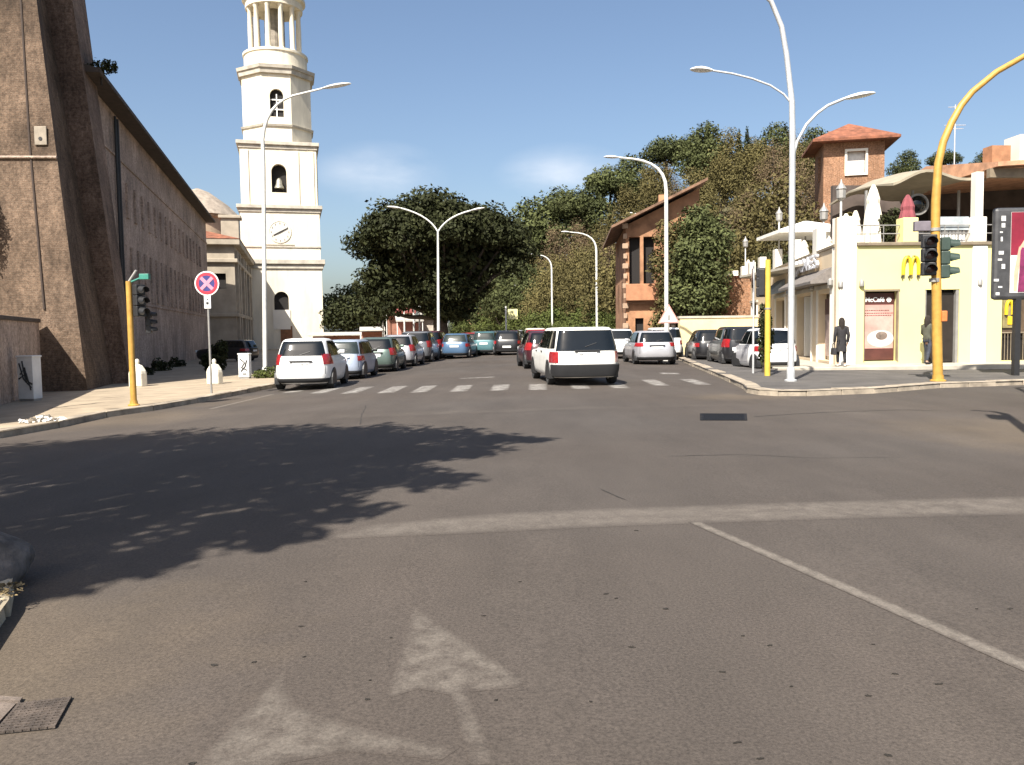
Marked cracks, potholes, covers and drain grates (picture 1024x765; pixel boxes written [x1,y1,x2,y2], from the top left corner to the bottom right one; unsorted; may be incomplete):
drain grate [0,696,72,734]
